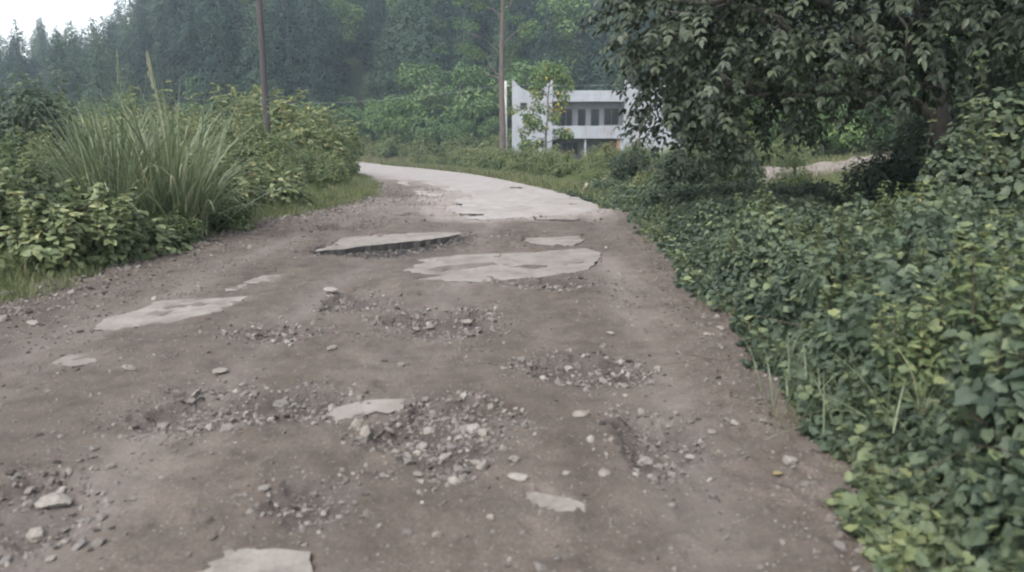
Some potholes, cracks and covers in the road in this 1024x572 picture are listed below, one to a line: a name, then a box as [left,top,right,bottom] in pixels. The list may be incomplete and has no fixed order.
pothole [580,403,749,496]
pothole [500,348,675,397]
pothole [215,316,342,347]
pothole [336,387,539,496]
pothole [362,305,519,343]
pothole [96,379,389,445]
